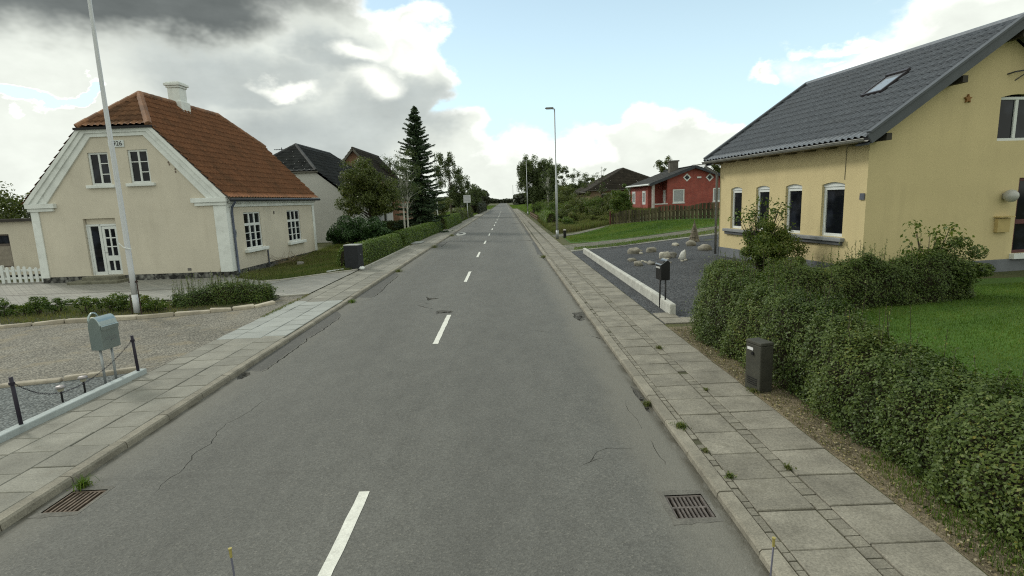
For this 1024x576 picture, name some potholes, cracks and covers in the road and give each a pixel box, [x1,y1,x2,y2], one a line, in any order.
drain grate [26,486,115,519]
drain grate [656,490,723,525]
crack [156,401,263,492]
